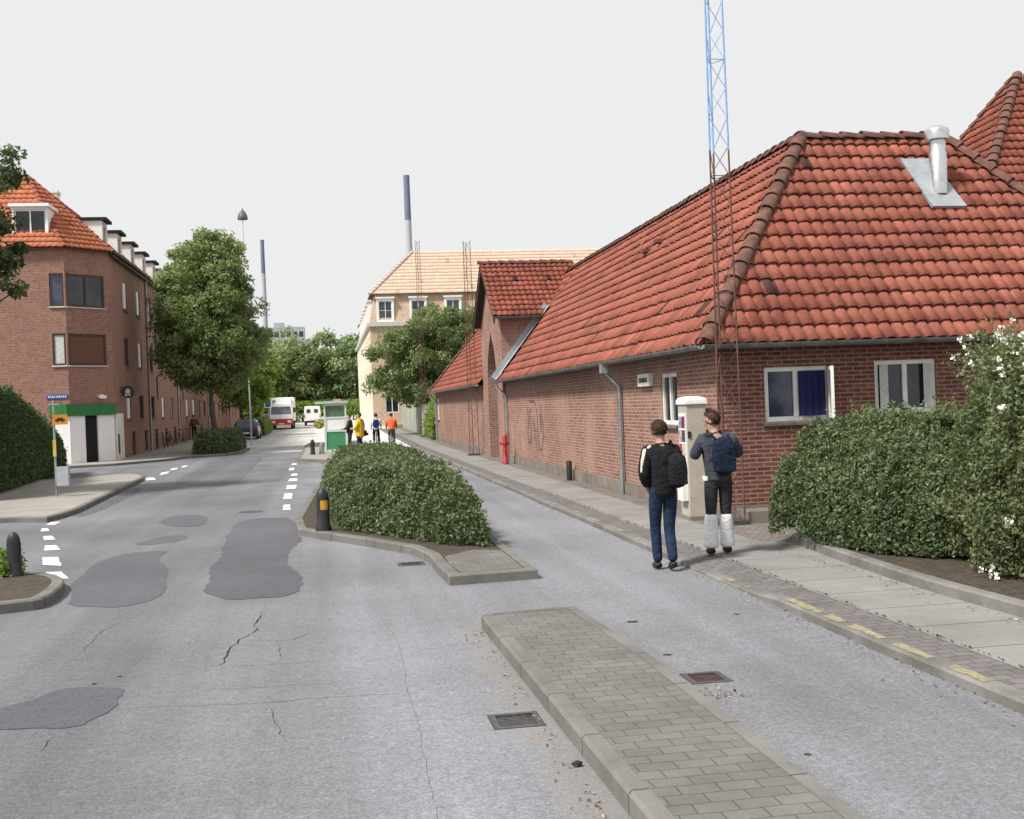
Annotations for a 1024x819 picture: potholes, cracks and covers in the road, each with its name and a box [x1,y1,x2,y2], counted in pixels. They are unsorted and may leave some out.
drain grate [680,671,733,685]
crack [201,612,336,669]
crack [137,682,399,744]
drain grate [488,711,546,730]
